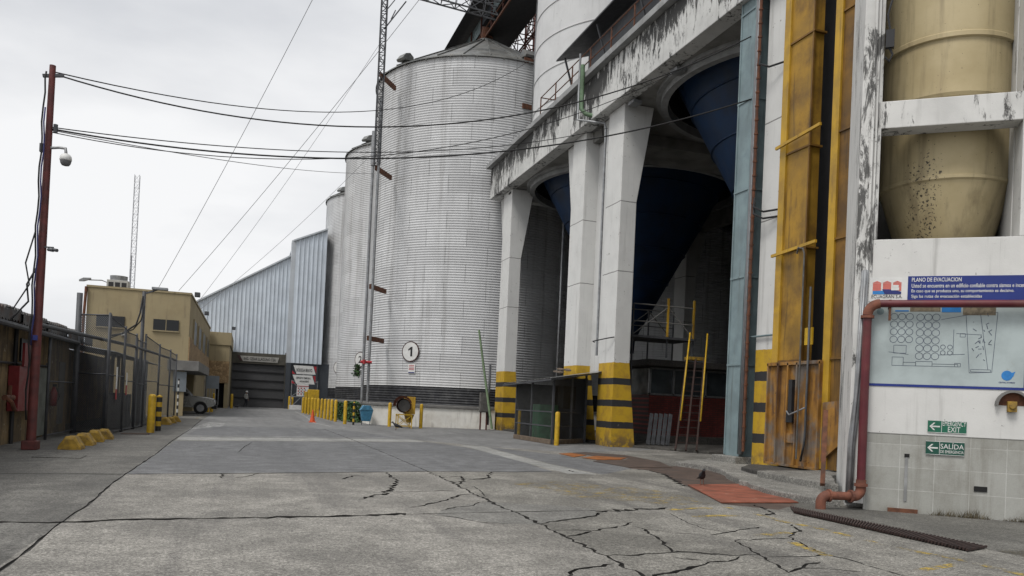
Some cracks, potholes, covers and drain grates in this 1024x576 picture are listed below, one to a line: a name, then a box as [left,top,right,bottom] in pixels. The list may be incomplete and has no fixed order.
drain grate [790,506,987,551]
crack [363,472,903,576]
